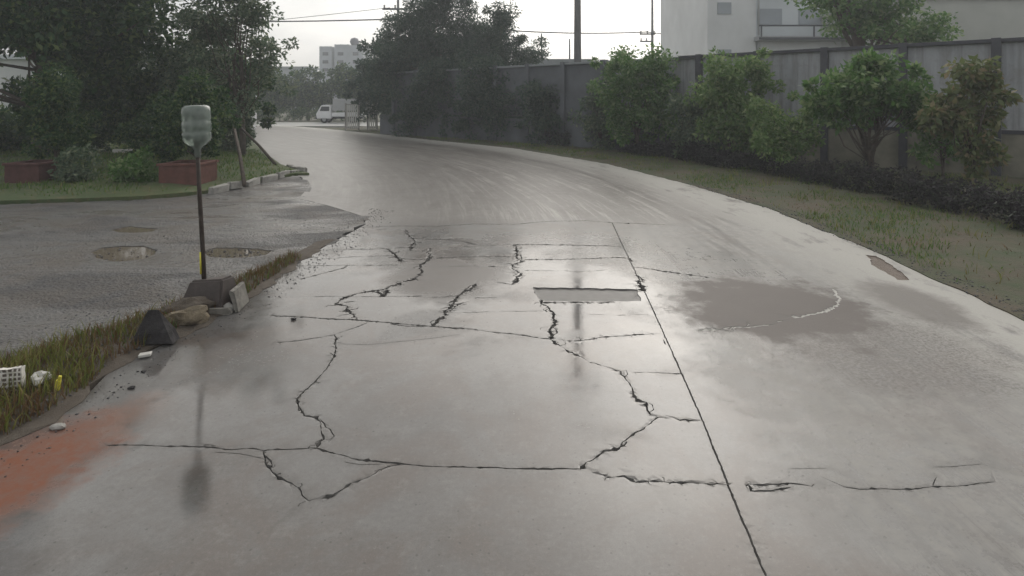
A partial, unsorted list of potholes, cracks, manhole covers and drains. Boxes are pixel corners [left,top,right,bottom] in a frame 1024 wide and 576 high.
crack [108,230,729,505]
pothole [91,246,156,262]
crack [746,477,991,492]
pothole [205,247,272,258]
